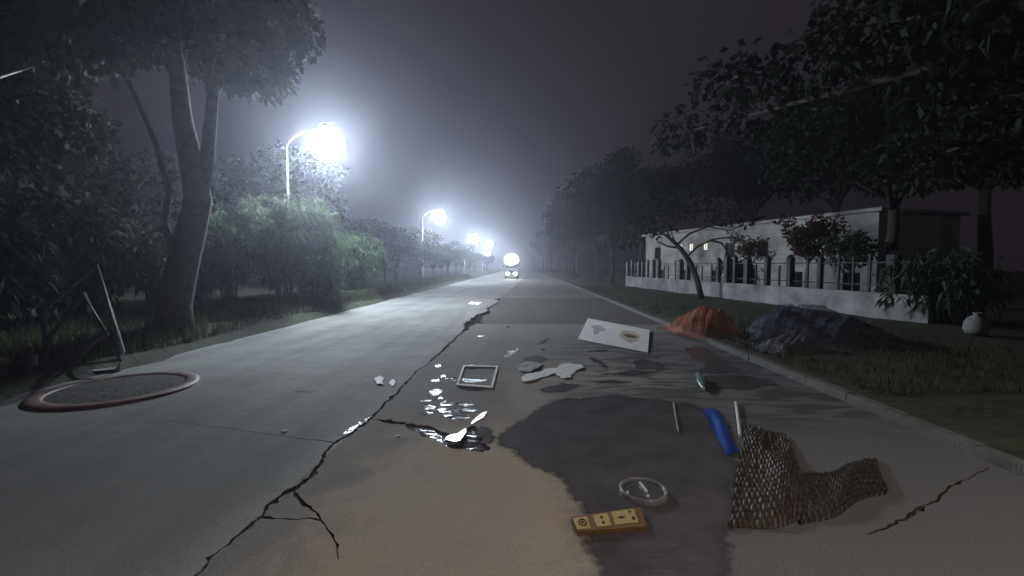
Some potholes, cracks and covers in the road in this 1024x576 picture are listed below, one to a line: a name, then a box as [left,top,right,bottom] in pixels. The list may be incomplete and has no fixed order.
pothole [402,423,490,453]
crack [170,333,463,576]
crack [868,467,989,535]
